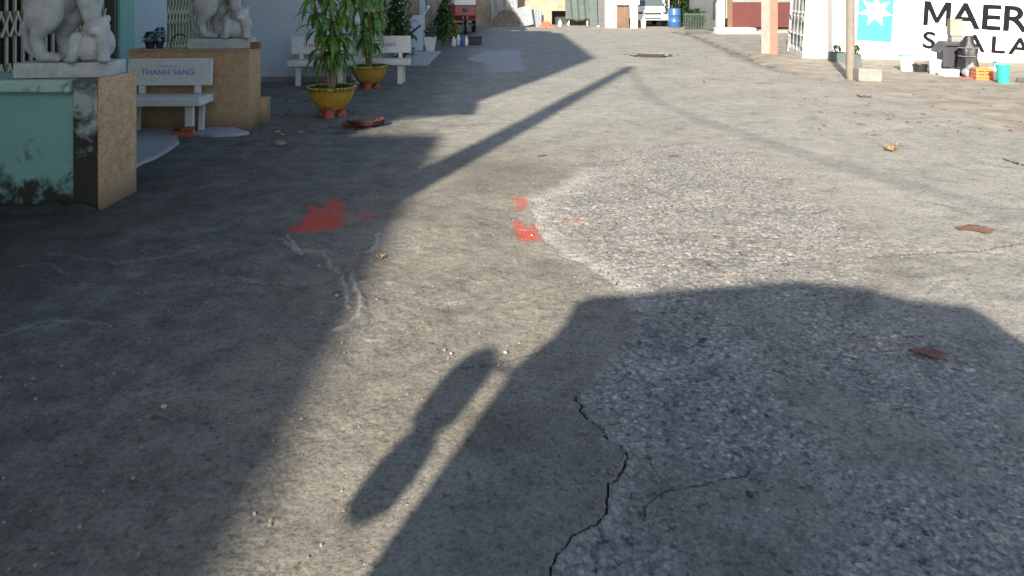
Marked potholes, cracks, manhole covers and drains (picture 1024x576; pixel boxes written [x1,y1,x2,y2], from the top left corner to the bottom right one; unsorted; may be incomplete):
crack [549,397,629,576]
crack [642,469,751,522]
